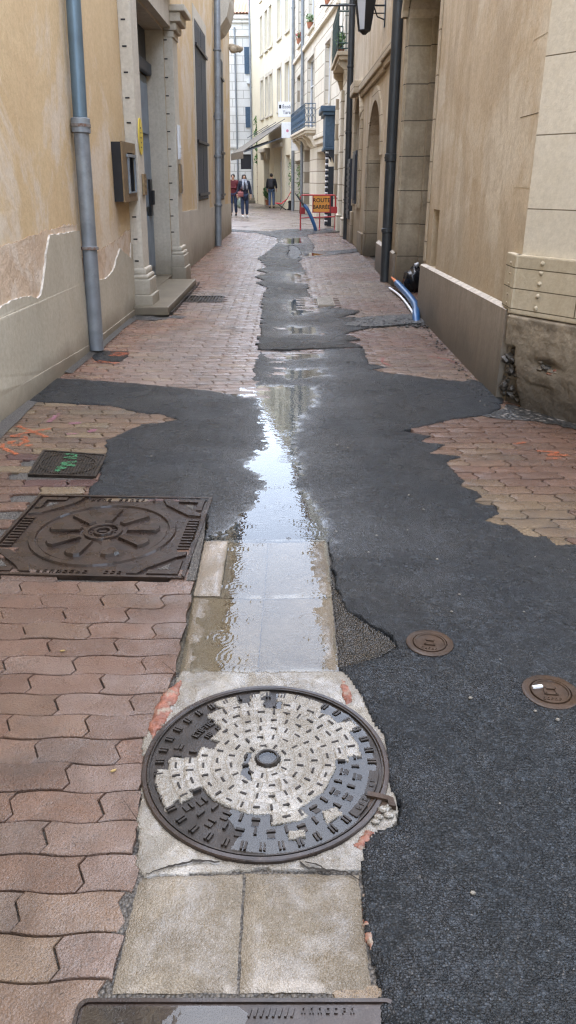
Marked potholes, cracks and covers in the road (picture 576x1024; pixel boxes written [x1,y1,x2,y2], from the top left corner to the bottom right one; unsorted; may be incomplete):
pothole [329,565,397,671]
crack [300,861,360,881]
utility cover [522,675,576,710]
manhole cover [0,494,213,582]
manhole cover [141,686,396,865]
utility cover [406,630,454,657]
utility cover [28,449,107,479]
